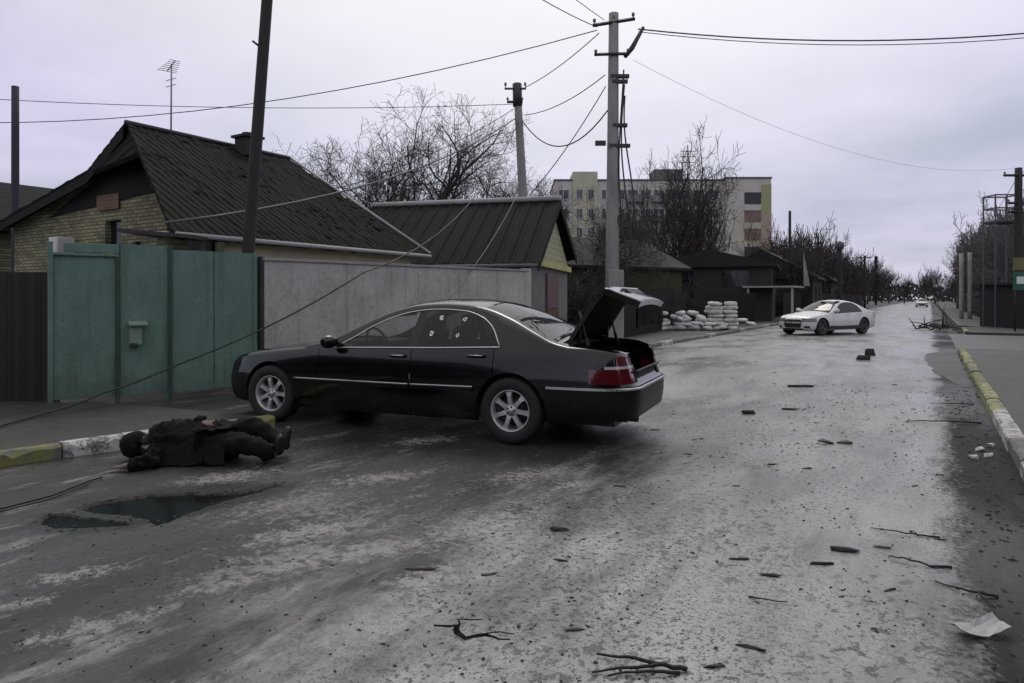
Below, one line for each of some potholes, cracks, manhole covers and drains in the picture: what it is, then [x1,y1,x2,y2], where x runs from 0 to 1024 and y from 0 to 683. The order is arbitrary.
pothole [34,513,136,532]
pothole [73,481,285,527]
